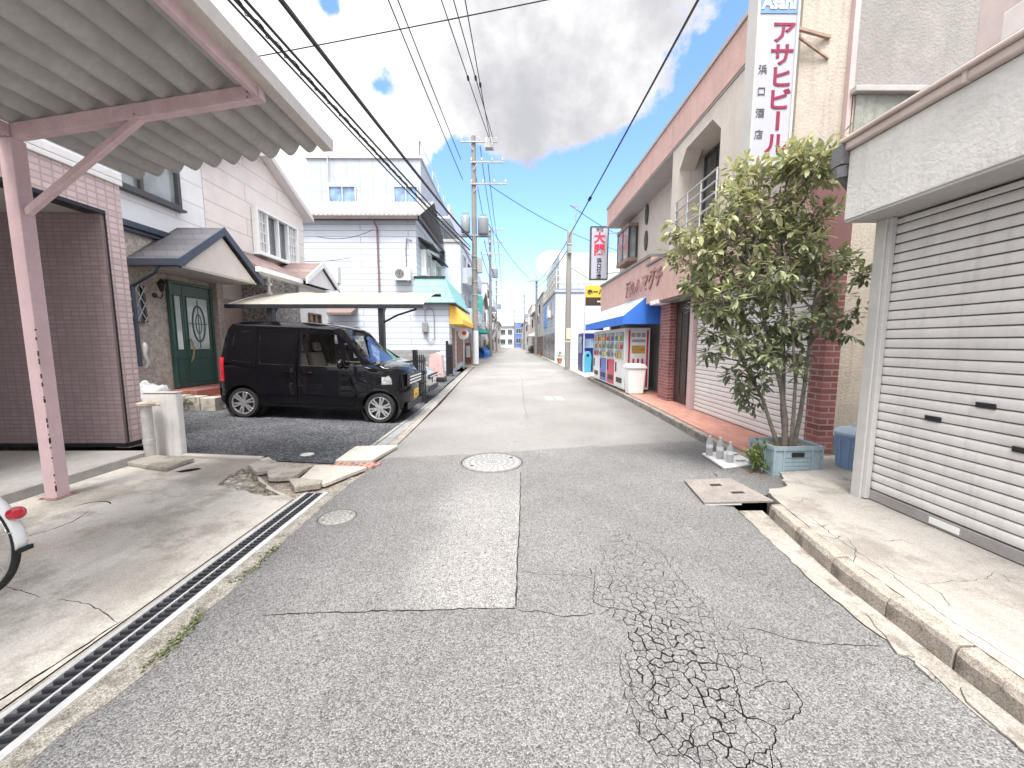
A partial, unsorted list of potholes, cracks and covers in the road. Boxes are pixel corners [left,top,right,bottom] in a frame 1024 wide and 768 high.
crack [592,531,885,768]
manhole cover [459,453,525,473]
manhole cover [316,509,358,526]
crack [888,568,1022,604]
pothole [218,469,280,496]
drain grate [0,492,328,762]
